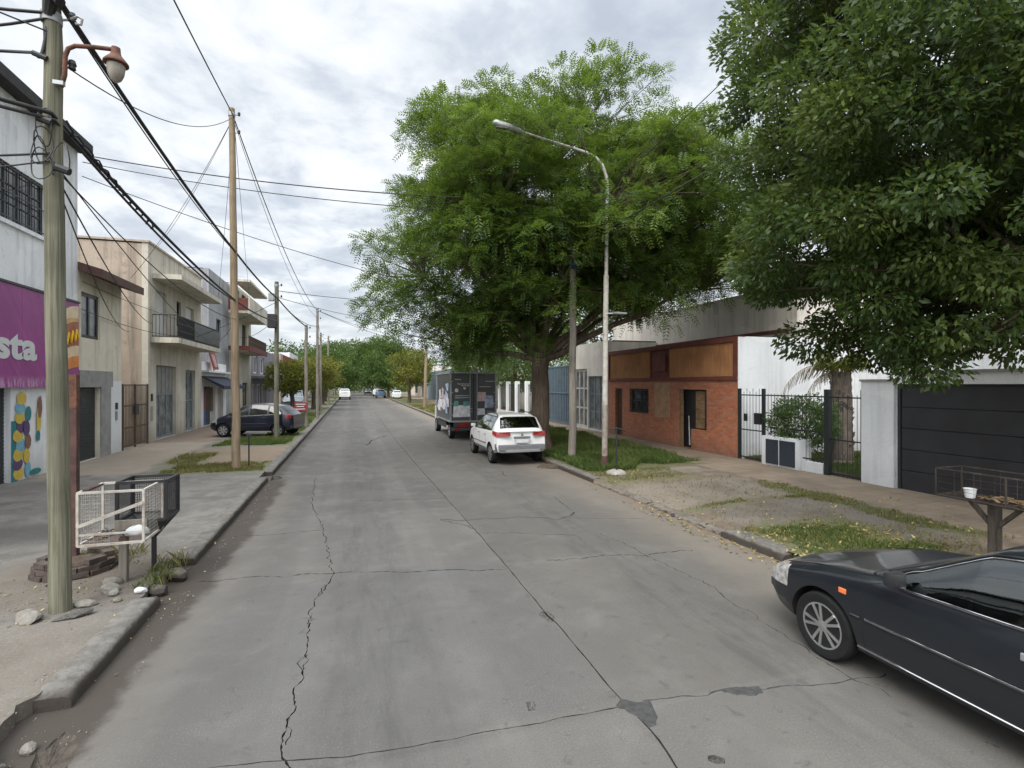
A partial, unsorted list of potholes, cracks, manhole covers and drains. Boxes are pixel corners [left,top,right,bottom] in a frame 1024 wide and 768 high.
crack [566,534,886,693]
crack [199,481,617,768]
